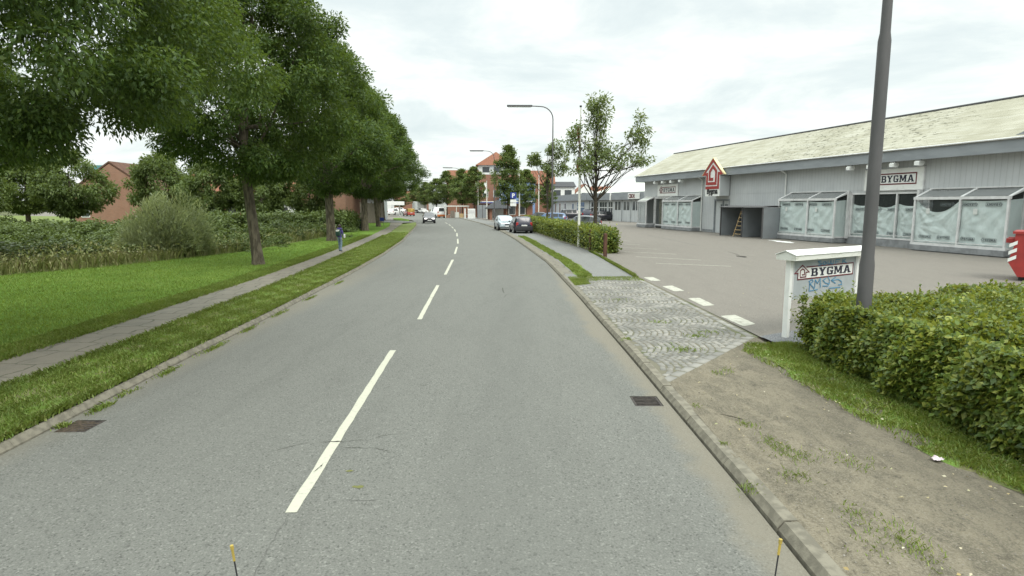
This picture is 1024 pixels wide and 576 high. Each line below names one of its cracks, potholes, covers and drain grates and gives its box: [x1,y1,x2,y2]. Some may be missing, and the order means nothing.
drain grate [55,420,107,432]
drain grate [630,396,663,406]
